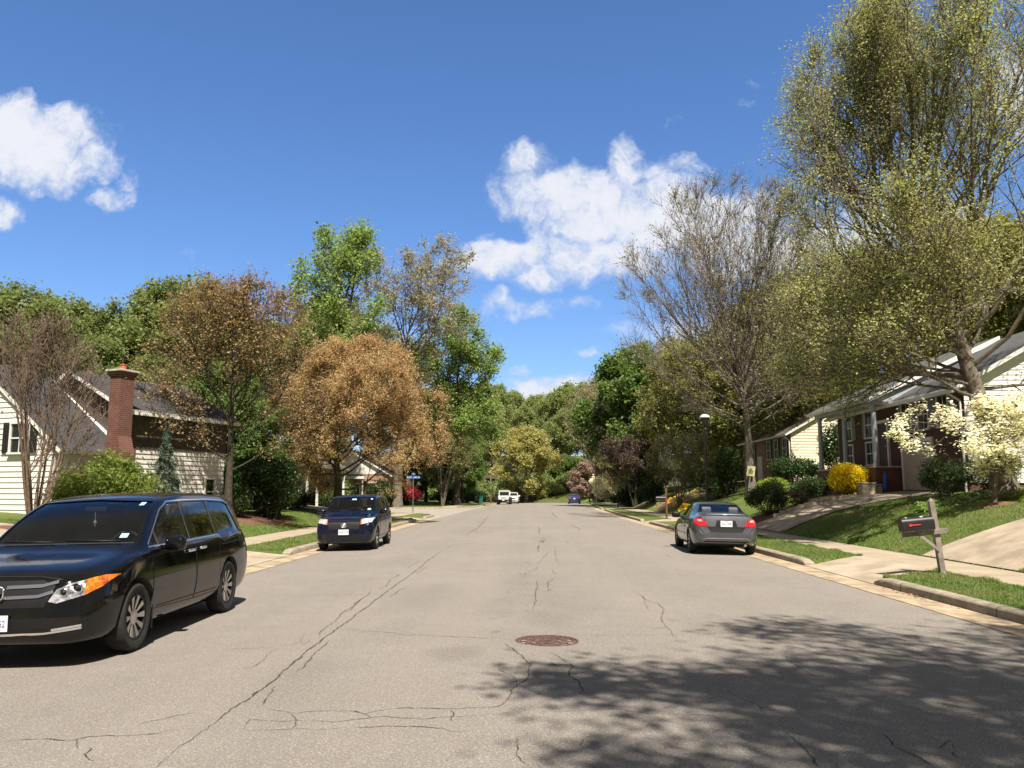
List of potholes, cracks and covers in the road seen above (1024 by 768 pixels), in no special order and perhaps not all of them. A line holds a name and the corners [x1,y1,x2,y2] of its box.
crack [438,514,581,604]
manhole cover [515,635,579,647]
crack [244,706,498,732]
crack [11,713,188,761]
crack [375,631,531,702]
